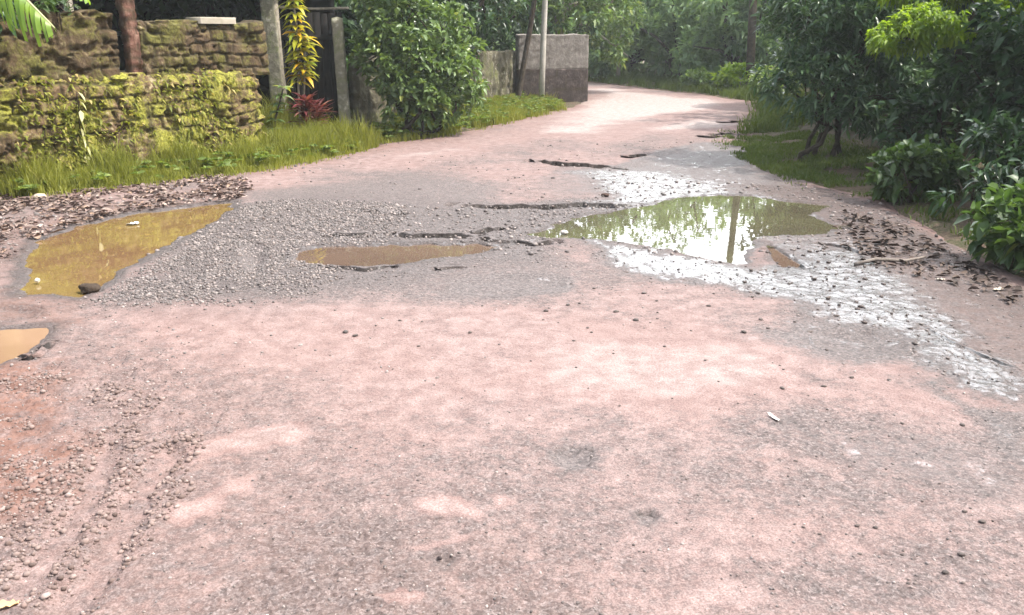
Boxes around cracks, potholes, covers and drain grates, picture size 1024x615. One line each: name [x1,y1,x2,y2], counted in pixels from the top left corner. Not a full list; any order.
pothole [8,200,240,299]
crack [701,120,752,138]
crack [531,153,647,170]
crack [330,201,641,247]
pothole [525,194,850,264]
pothole [282,241,524,269]
pothole [0,325,54,364]
pothole [765,248,800,268]
